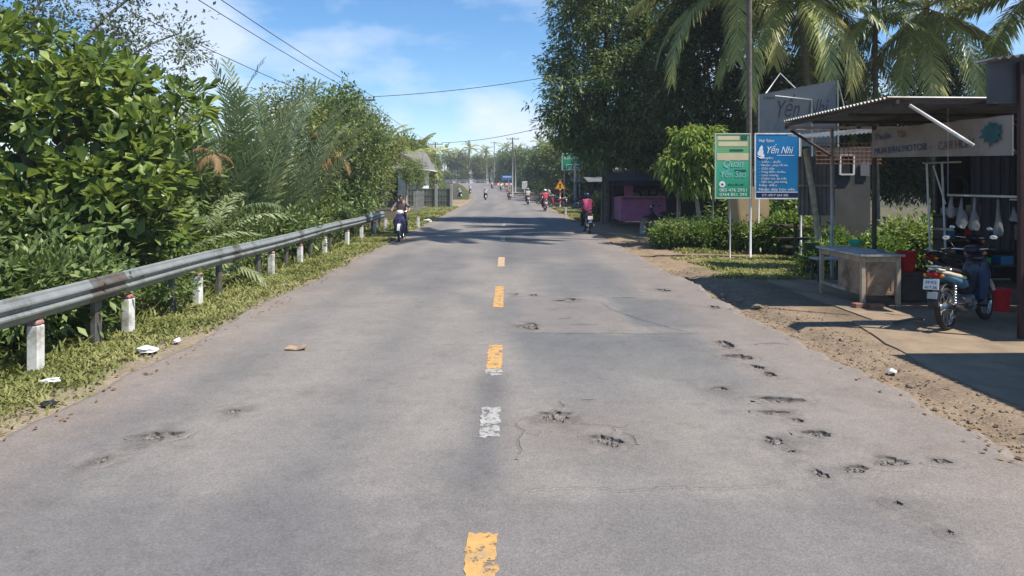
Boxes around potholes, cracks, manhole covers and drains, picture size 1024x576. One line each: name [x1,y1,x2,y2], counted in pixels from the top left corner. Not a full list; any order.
crack [513,399,639,460]
pothole [576,431,634,452]
pothole [524,407,582,427]
pothole [123,427,197,445]
pothole [830,460,881,479]
pothole [714,353,760,362]
pothole [744,394,817,406]
